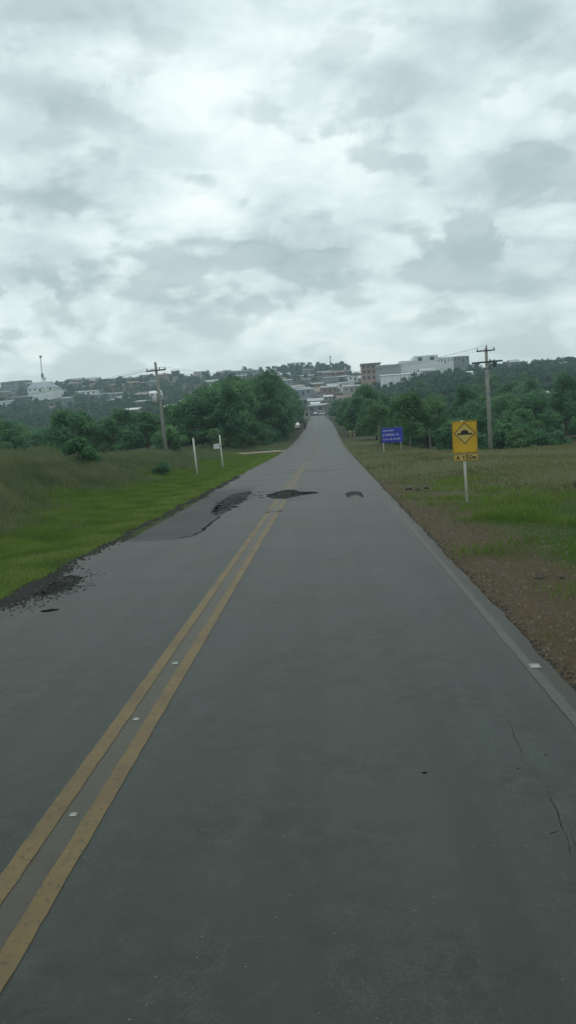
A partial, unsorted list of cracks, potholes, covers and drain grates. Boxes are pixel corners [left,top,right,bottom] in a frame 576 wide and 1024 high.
crack [547,791,576,851]
pothole [266,490,319,499]
pothole [34,575,84,597]
pothole [210,491,253,515]
